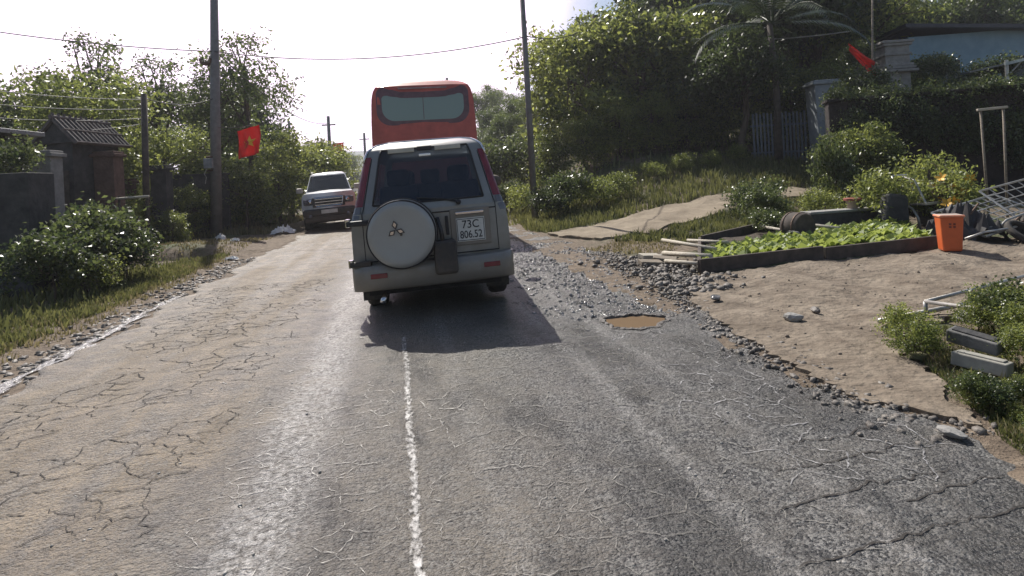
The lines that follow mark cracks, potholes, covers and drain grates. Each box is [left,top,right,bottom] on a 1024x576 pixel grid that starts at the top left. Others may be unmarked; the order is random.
crack [416,326,1024,576]
crack [0,278,334,576]
crack [175,334,399,576]
pothole [599,312,672,329]
